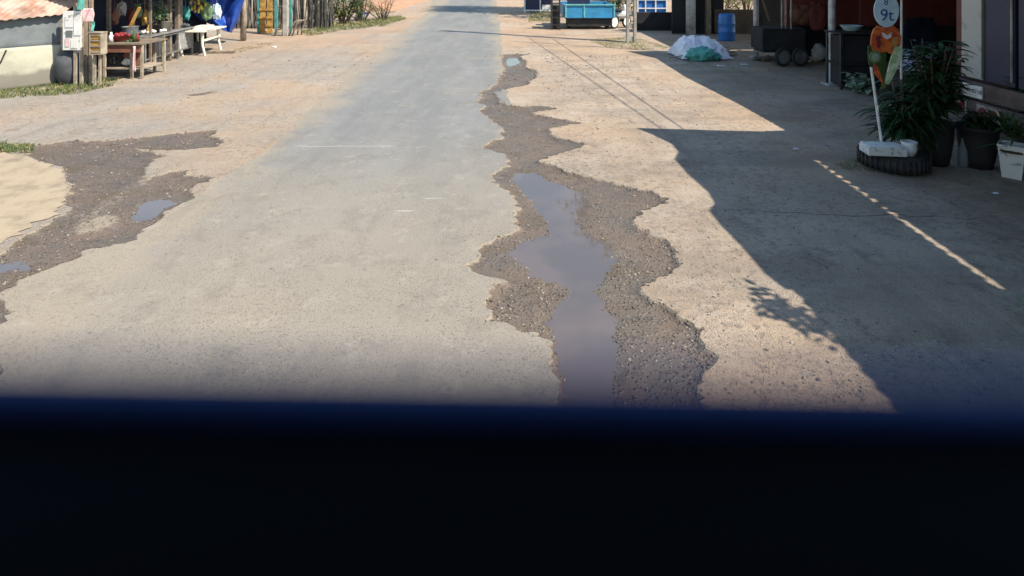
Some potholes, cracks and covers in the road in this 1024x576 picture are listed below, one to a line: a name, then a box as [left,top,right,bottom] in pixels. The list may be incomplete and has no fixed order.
pothole [463,54,719,373]
pothole [0,129,224,292]
